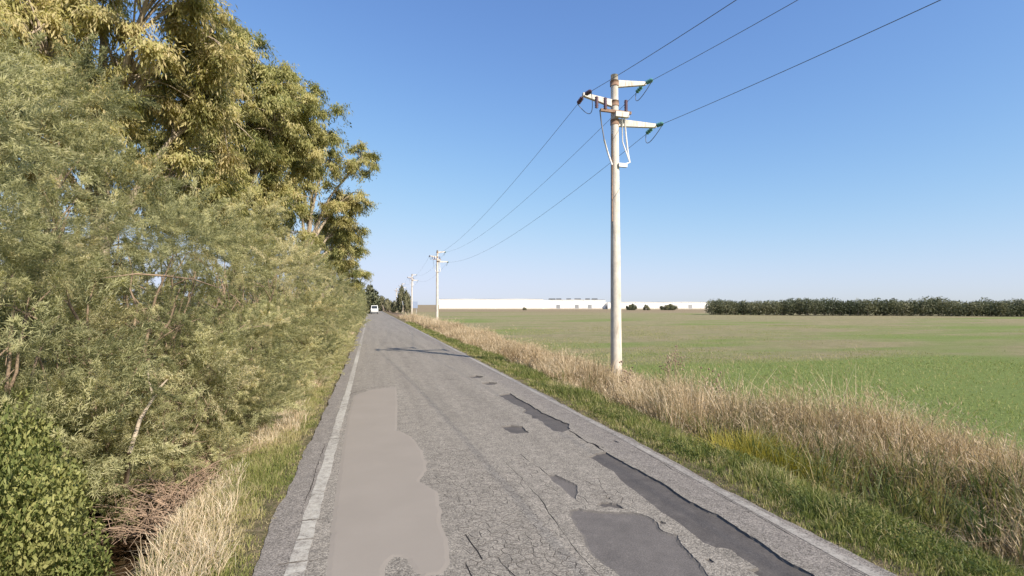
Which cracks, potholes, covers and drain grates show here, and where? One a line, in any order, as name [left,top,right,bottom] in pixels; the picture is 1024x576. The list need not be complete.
crack [428,447,584,576]
